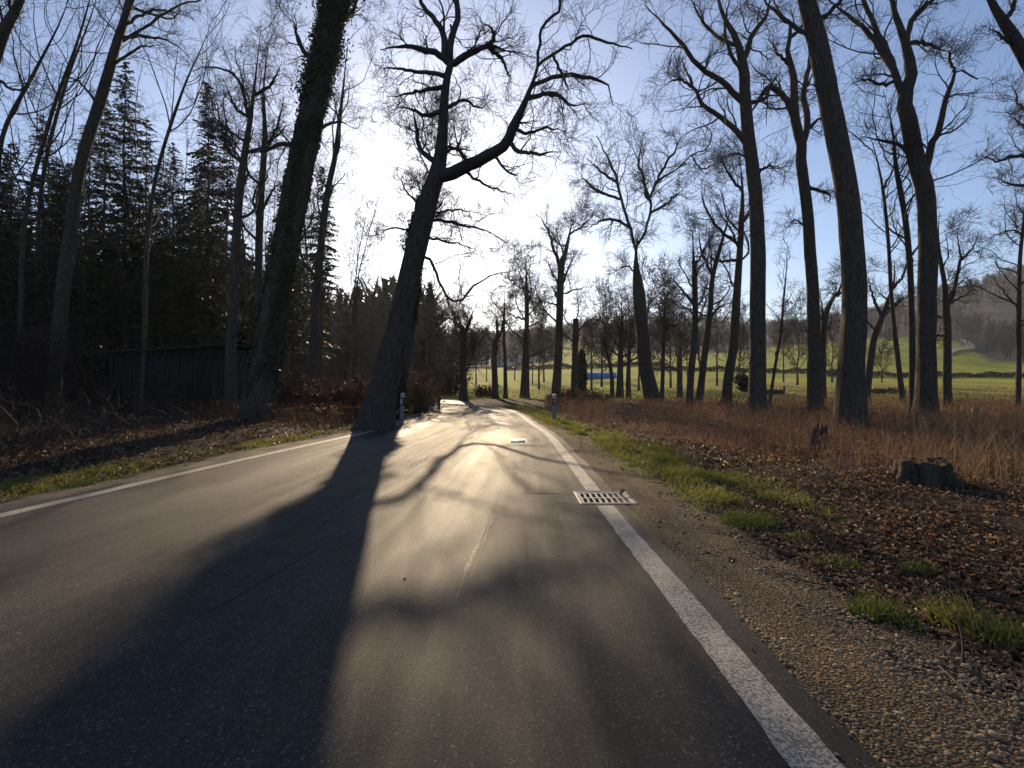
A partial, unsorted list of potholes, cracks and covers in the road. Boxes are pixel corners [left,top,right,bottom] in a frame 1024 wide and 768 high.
drain grate [573,492,639,505]
crack [192,527,360,619]
crack [451,515,494,626]
